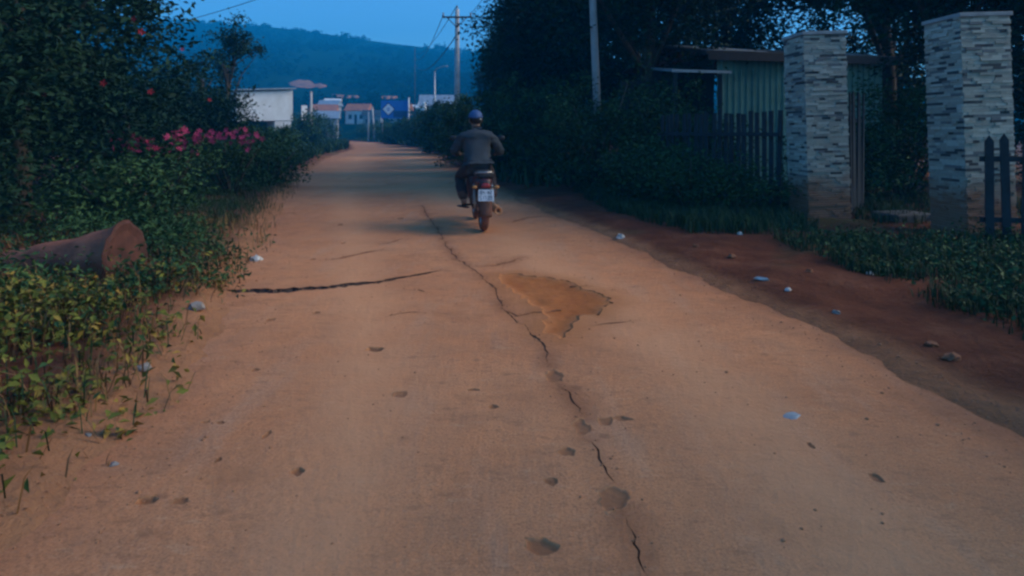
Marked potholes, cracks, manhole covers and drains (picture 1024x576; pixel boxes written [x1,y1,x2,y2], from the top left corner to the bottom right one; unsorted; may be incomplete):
crack [421,206,661,573]
pothole [595,485,632,516]
pothole [543,477,559,487]
pothole [571,417,593,436]
pothole [556,446,576,456]
pothole [544,368,566,382]
crack [229,238,436,294]
pothole [524,536,561,556]
